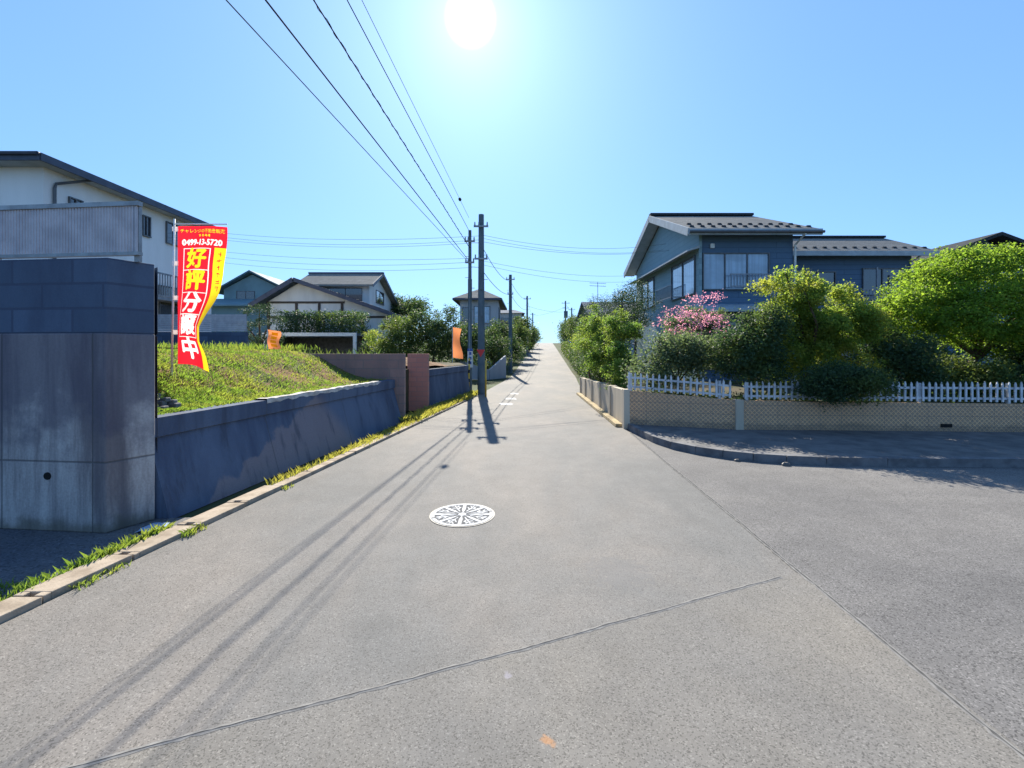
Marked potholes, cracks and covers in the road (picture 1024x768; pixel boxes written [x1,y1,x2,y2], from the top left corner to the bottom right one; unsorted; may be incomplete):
manhole cover [429,504,495,528]
